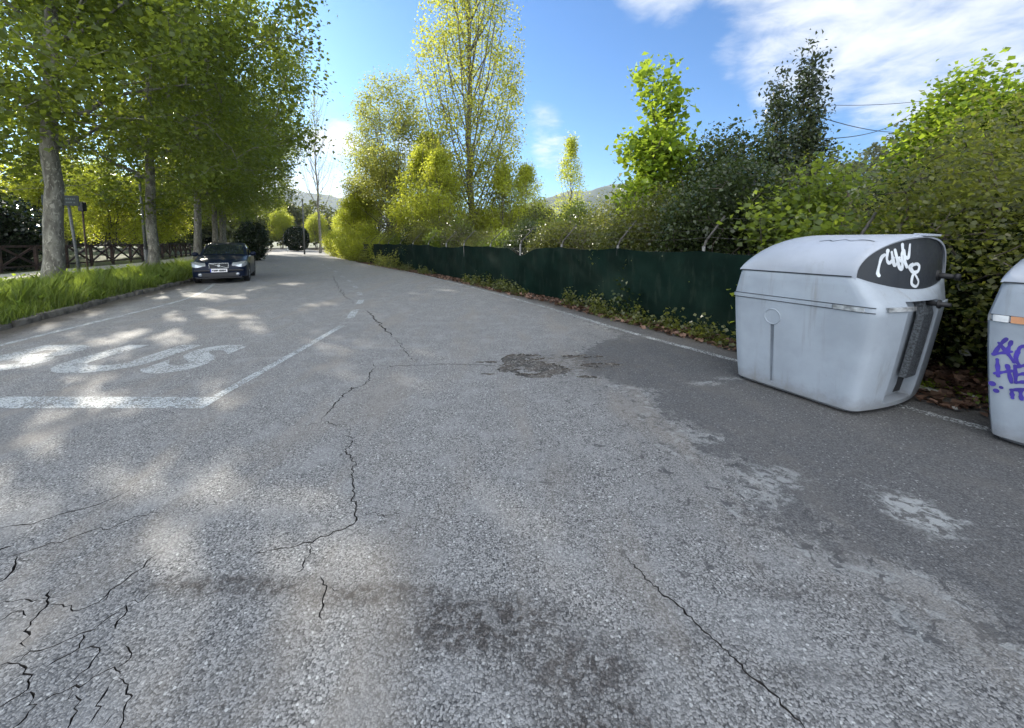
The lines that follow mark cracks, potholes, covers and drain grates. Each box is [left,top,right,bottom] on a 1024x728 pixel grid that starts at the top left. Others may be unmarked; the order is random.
crack [619,552,805,728]
crack [0,491,160,728]
crack [232,364,401,623]
